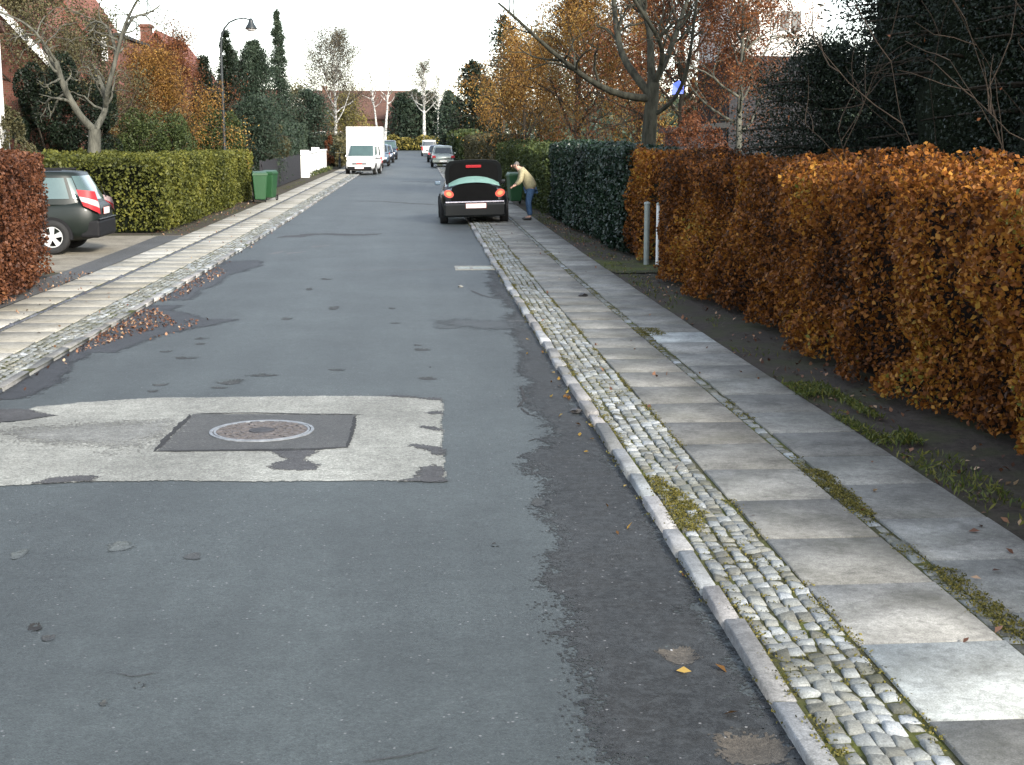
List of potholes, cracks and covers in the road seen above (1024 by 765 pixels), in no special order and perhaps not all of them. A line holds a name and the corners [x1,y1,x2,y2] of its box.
pothole [107,541,135,552]
manhole cover [209,420,314,442]
pothole [9,549,30,559]
